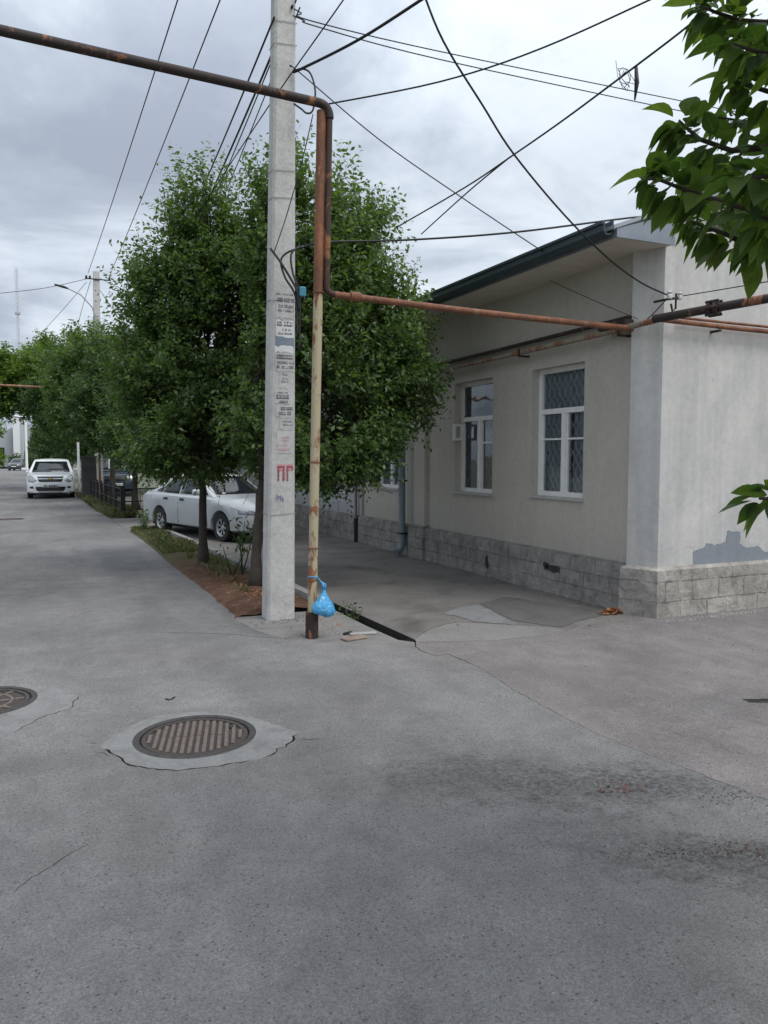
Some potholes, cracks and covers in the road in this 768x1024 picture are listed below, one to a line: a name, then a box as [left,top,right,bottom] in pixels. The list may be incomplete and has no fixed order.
manhole cover [0,686,38,714]
crack [11,846,84,894]
manhole cover [132,715,256,759]
